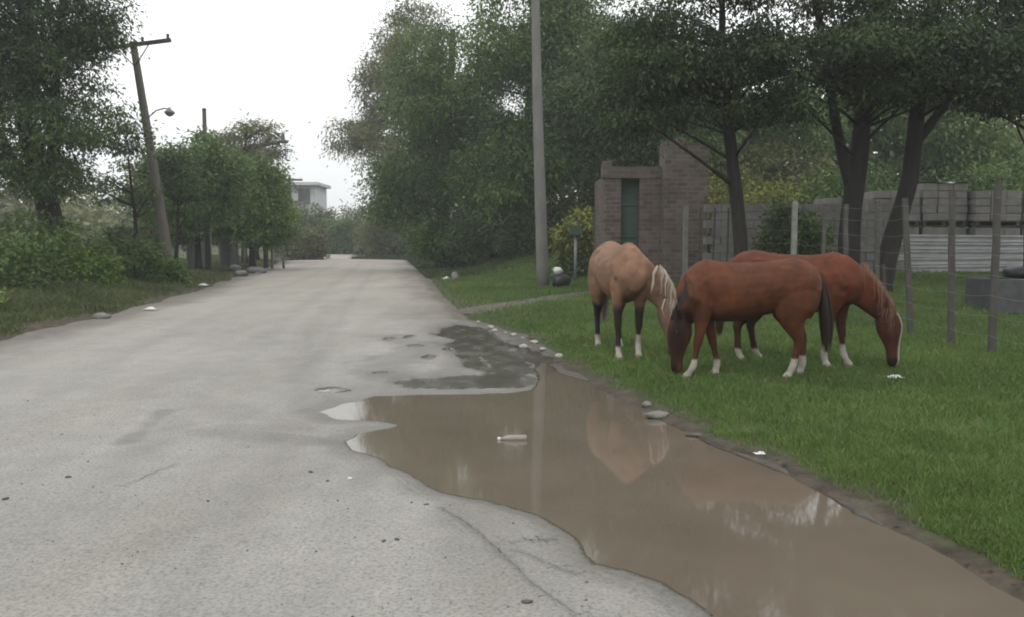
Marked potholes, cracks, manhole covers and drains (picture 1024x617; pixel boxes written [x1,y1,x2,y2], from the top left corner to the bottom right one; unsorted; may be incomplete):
pothole [415,353,440,361]
crack [432,505,589,617]
pothole [305,360,1024,617]
crack [115,463,187,487]
